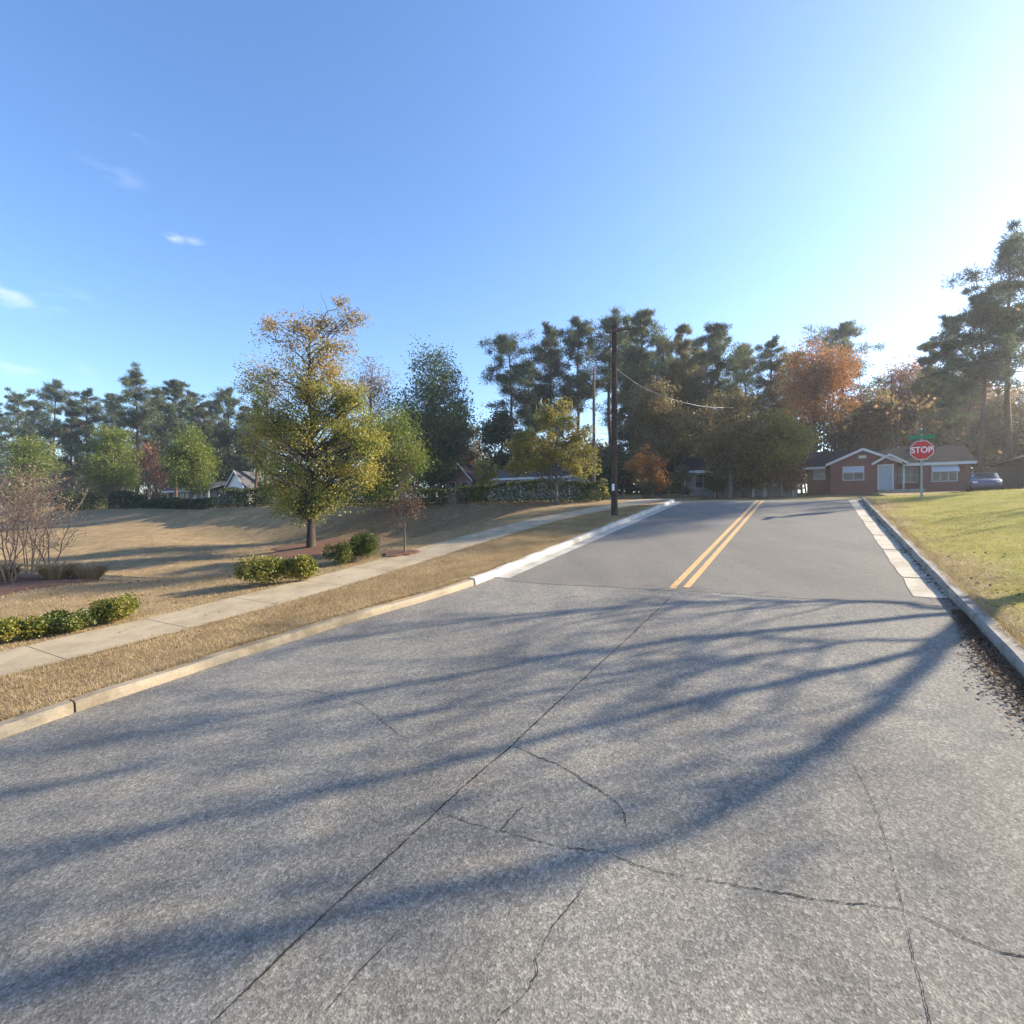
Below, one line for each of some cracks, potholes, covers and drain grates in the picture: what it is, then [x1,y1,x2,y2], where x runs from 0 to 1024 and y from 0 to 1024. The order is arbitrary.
crack [211,596,1024,1024]
